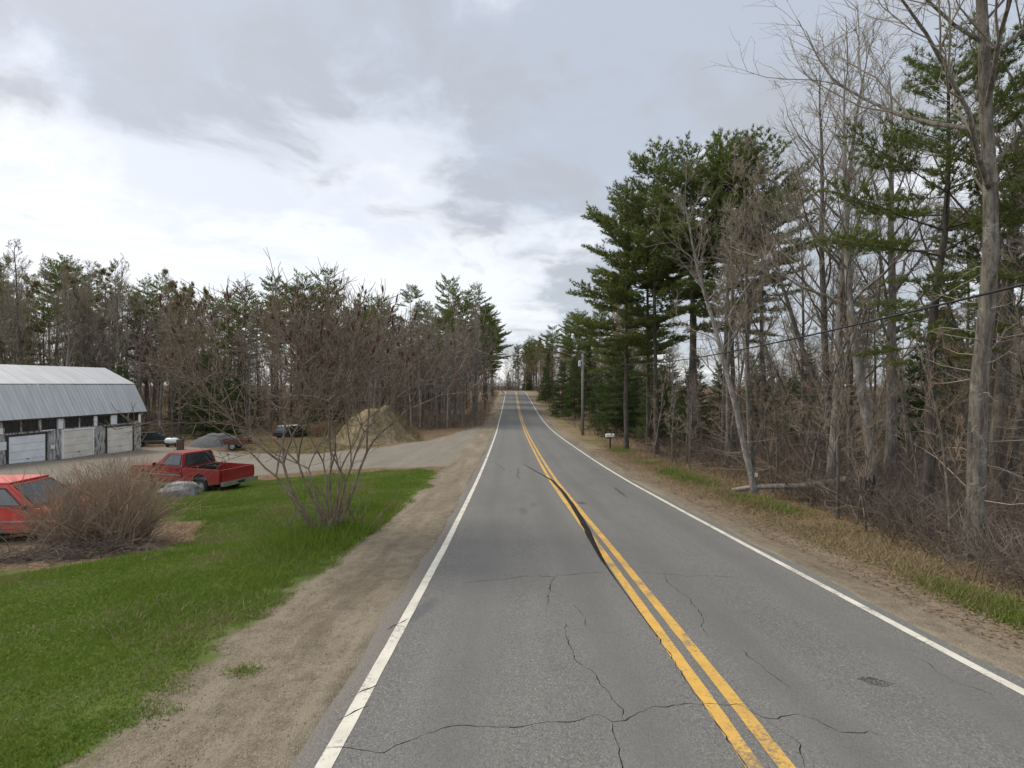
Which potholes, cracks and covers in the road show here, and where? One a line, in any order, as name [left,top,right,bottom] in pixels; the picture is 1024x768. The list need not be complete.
crack [342,605,887,768]
crack [648,572,721,639]
